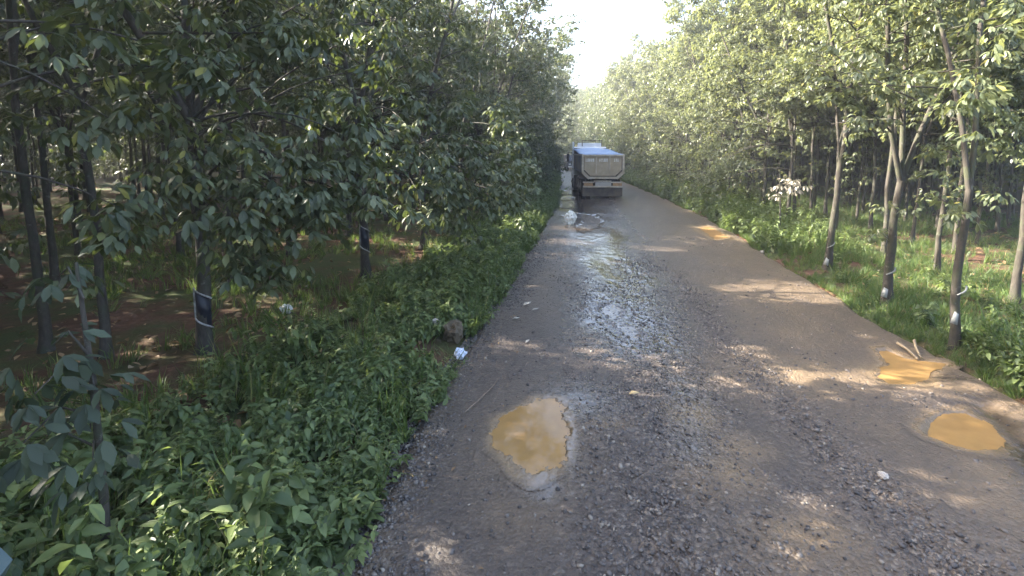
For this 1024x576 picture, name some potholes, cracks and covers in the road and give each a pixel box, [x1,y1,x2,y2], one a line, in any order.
pothole [861,342,963,389]
pothole [480,392,585,492]
pothole [901,401,1024,461]
pothole [561,212,606,230]
